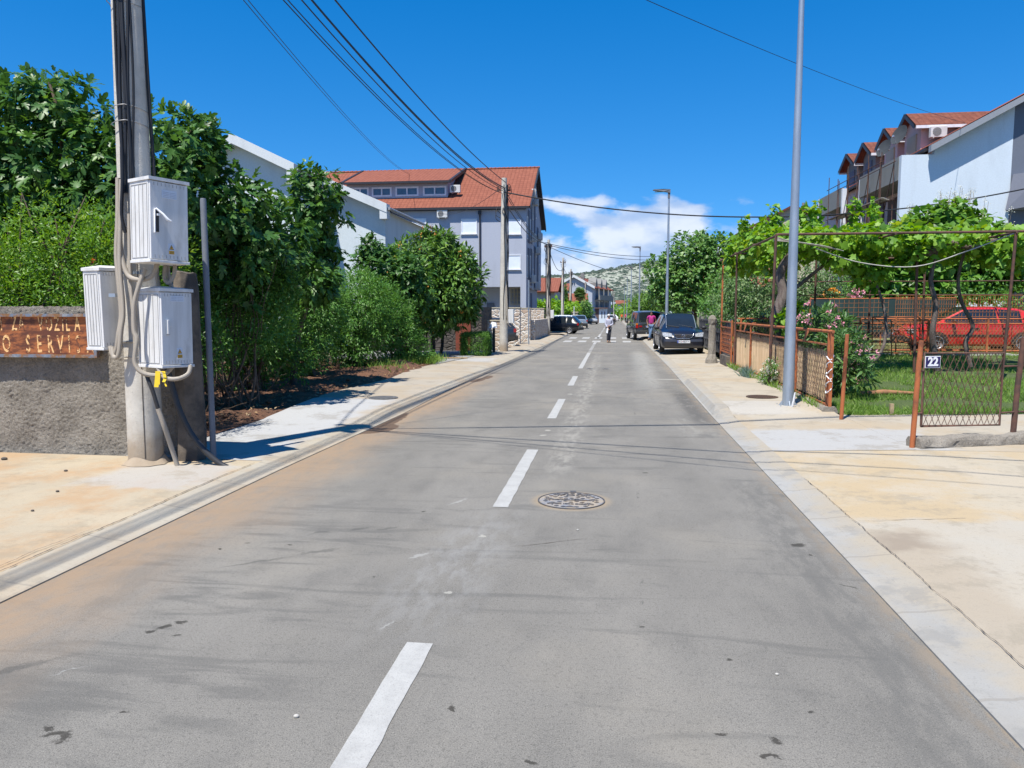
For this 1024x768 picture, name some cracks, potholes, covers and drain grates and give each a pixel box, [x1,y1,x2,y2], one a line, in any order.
manhole cover [538,491,605,510]
